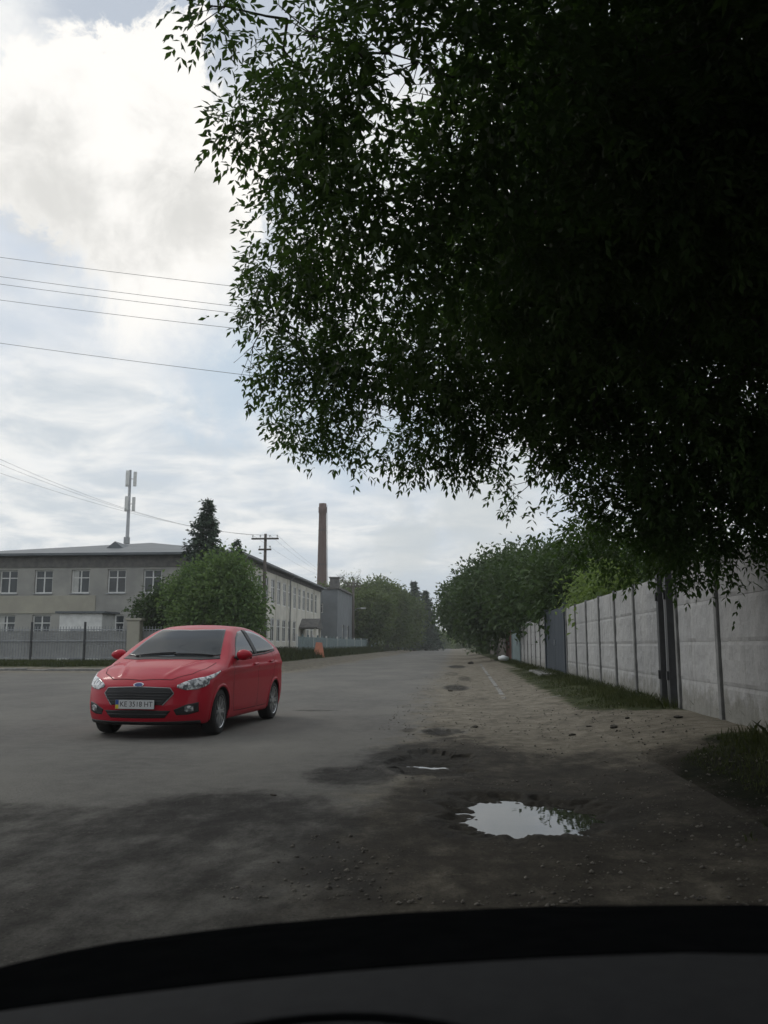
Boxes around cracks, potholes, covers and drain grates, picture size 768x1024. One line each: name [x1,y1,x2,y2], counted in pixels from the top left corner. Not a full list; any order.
pothole [416,727,471,735]
pothole [370,747,485,780]
pothole [413,787,659,848]
